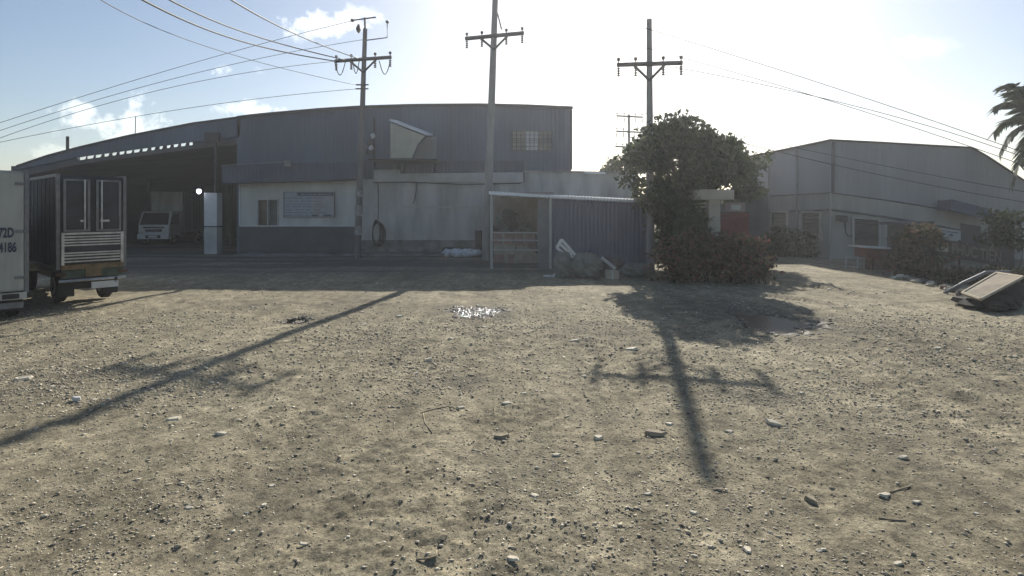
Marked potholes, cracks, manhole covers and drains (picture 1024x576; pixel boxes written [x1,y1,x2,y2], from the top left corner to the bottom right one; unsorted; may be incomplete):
pothole [714,309,834,336]
pothole [438,305,512,319]
